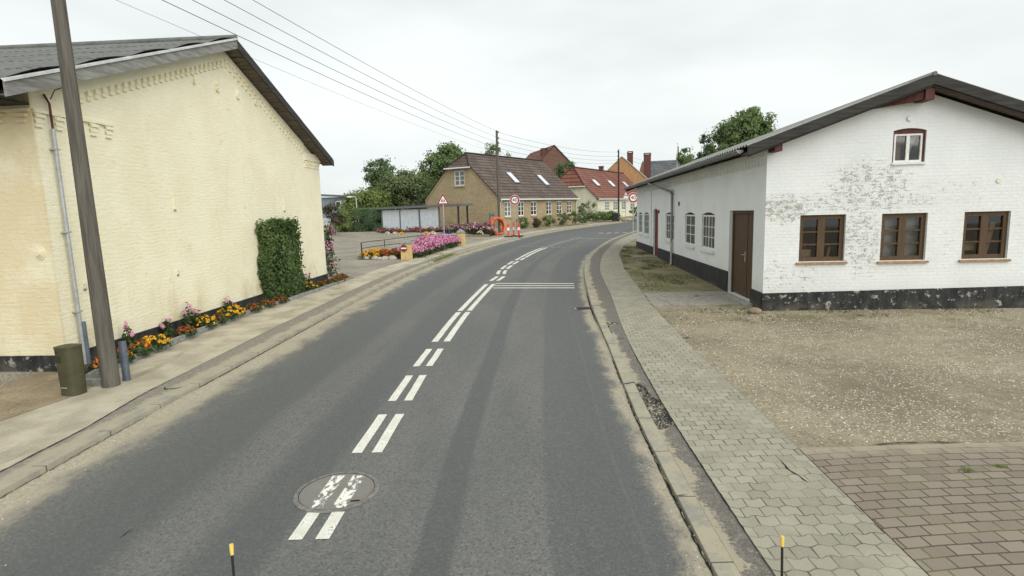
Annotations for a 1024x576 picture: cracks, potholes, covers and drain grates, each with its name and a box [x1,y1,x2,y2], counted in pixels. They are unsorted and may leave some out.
pothole [635,383,675,430]
manhole cover [293,471,380,513]
